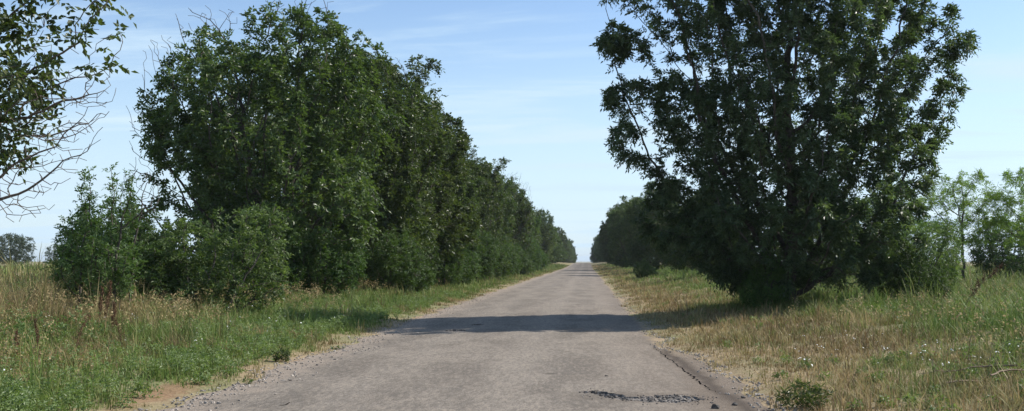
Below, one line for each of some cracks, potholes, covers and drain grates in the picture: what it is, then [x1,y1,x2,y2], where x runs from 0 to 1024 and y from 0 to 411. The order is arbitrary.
crack [655,348,716,392]
pothole [579,388,718,405]
